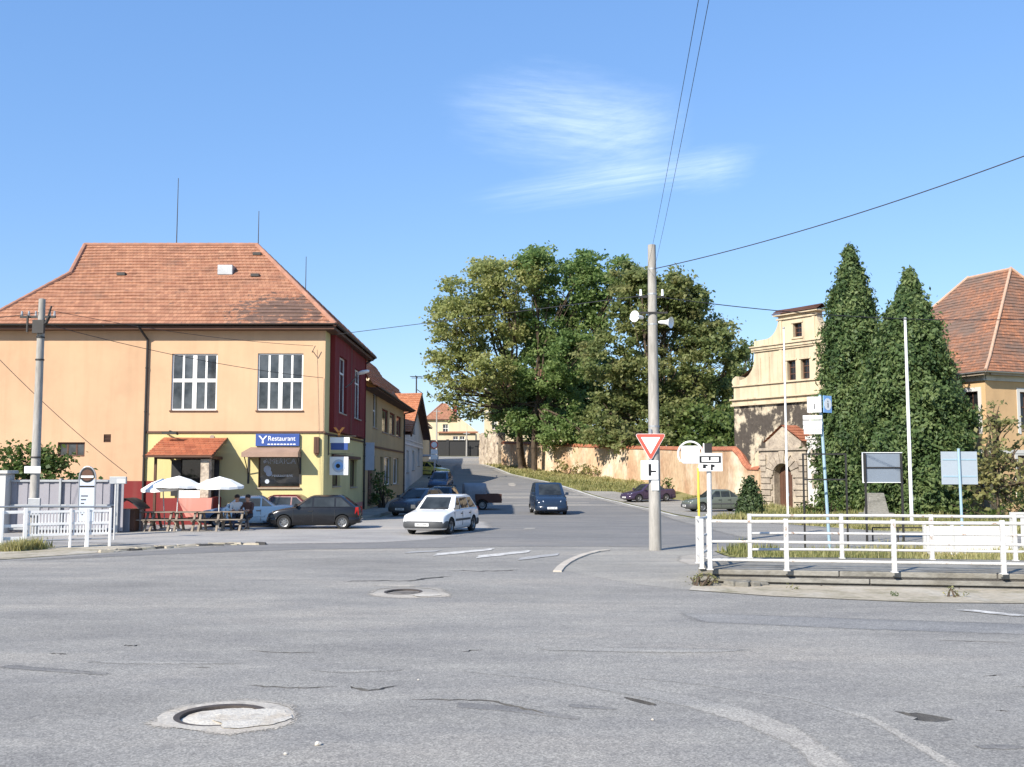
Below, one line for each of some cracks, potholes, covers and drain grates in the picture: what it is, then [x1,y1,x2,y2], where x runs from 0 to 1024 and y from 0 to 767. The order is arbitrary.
crack [351,685,544,714]
manhole cover [157,701,294,731]
manhole cover [373,588,440,597]
crack [345,570,513,582]
